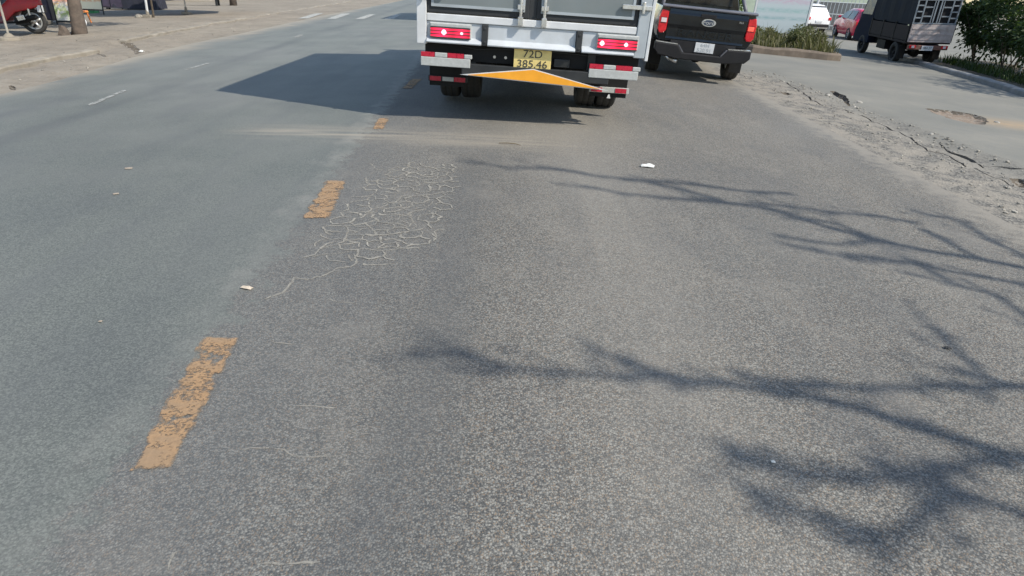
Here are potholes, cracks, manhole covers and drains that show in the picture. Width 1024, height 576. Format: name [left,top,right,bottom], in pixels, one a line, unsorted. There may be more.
crack [266,162,461,299]
crack [240,447,328,458]
pothole [925,108,988,125]
crack [763,74,1021,189]
